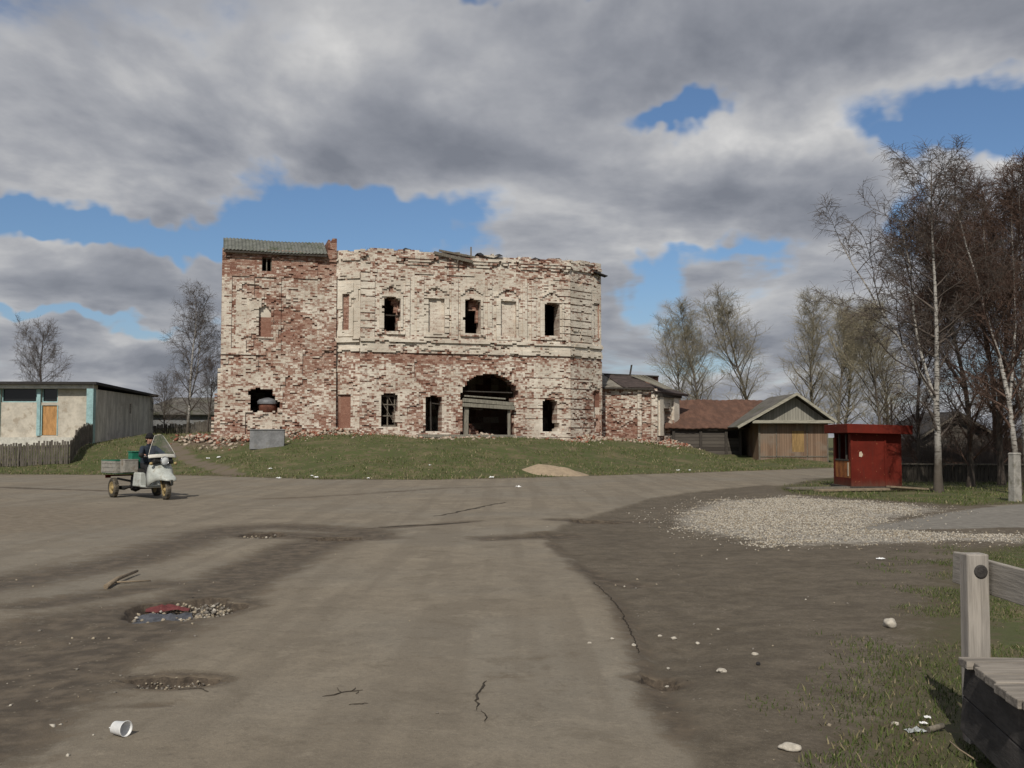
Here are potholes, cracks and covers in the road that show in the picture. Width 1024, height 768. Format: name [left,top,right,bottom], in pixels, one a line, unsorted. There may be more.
crack [474,680,487,721]
pothole [625,671,694,693]
pothole [107,596,262,626]
pothole [223,531,299,539]
pothole [108,673,237,691]
crack [388,502,505,527]
